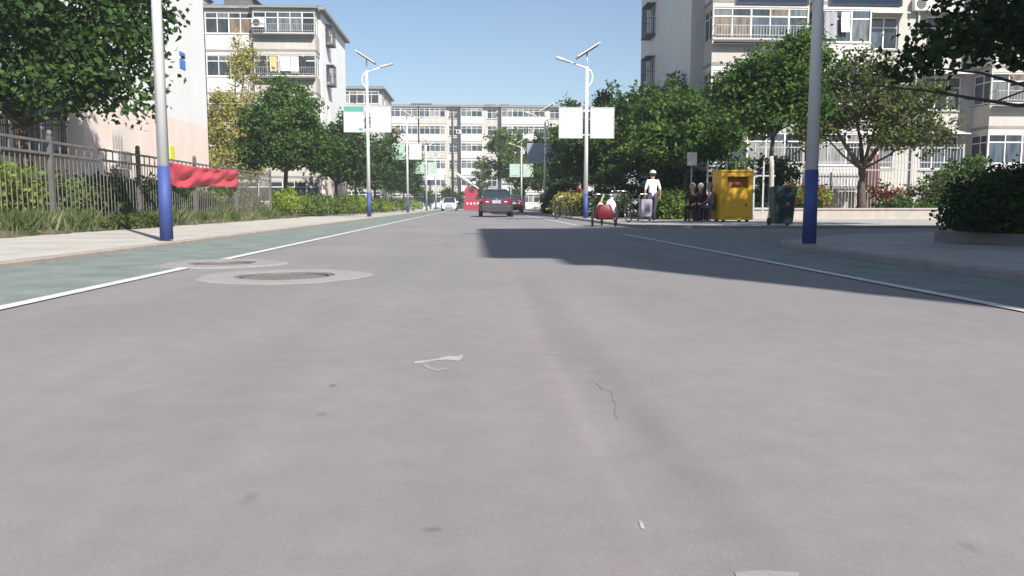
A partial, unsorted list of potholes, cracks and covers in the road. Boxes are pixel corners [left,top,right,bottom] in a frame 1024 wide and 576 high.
manhole cover [195,269,374,285]
manhole cover [155,259,289,269]
